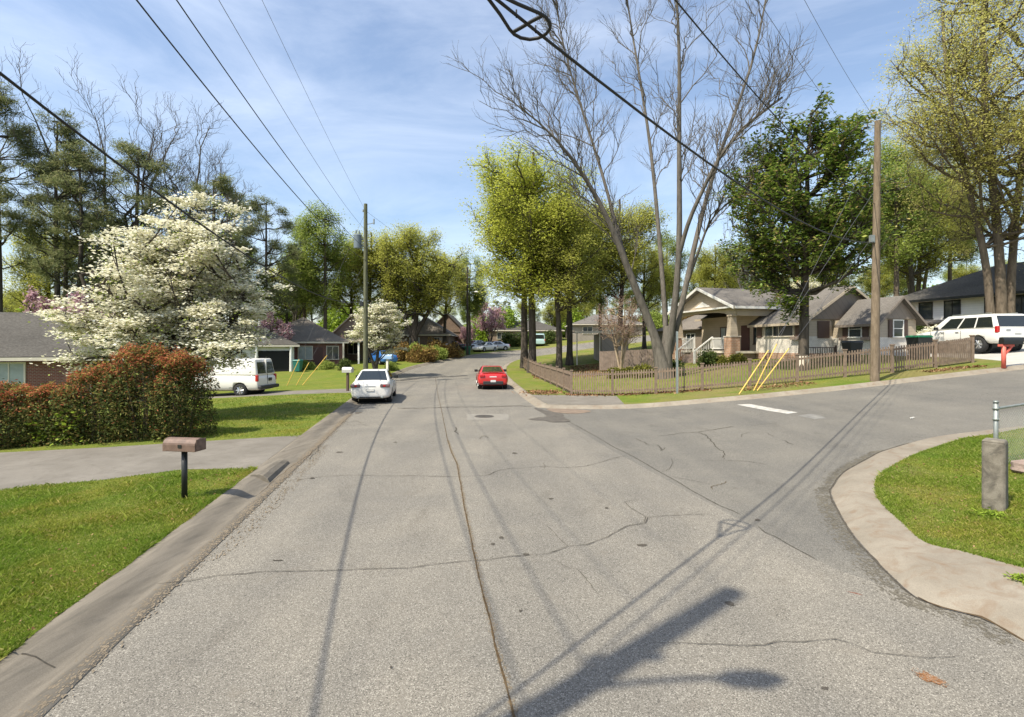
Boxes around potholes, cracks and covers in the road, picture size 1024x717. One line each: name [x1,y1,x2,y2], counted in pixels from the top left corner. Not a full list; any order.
crack [285,425,791,488]
crack [158,499,708,584]
crack [655,442,1024,658]
